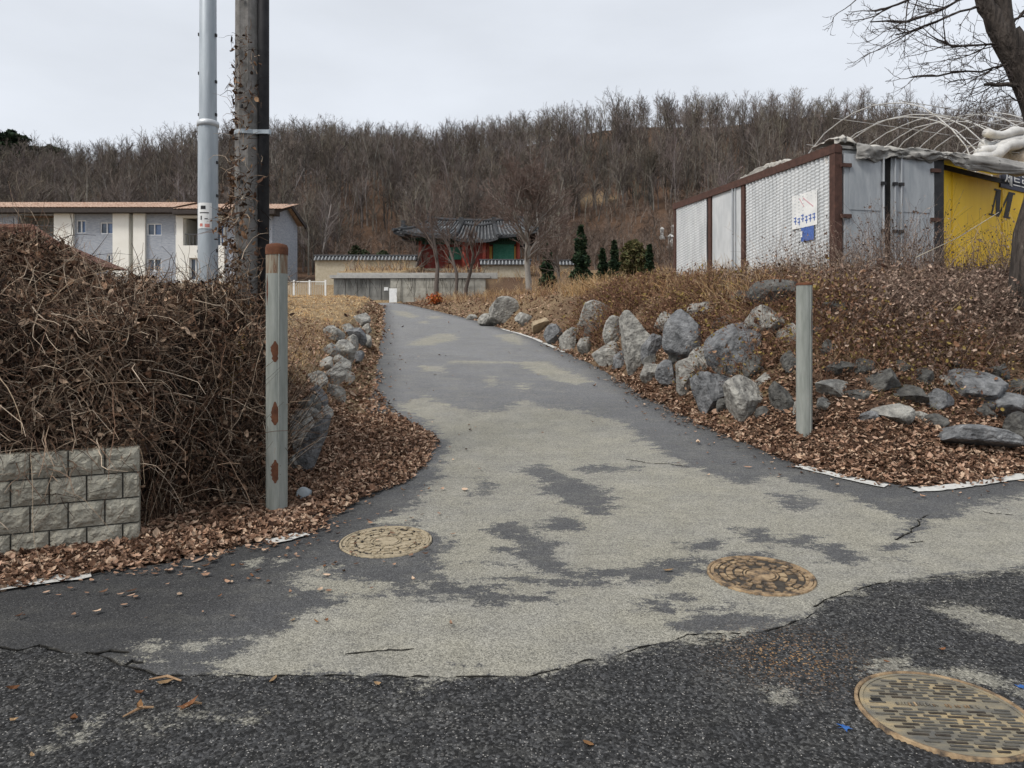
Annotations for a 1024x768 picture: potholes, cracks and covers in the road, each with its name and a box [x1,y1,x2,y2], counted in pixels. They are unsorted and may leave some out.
manhole cover [339,526,432,558]
crack [0,644,186,677]
crack [895,515,928,543]
manhole cover [707,556,817,597]
manhole cover [854,671,1024,764]
